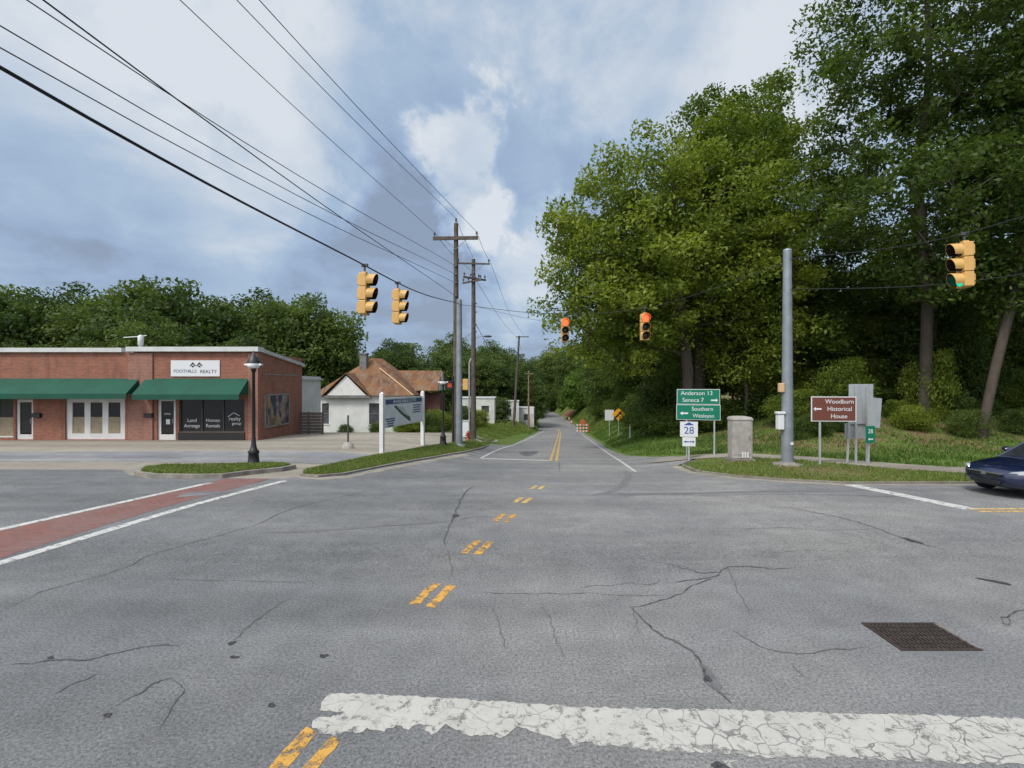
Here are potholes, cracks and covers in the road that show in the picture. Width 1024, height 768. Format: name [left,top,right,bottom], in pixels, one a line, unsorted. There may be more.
crack [107,677,185,727]
crack [472,550,860,703]
drain grate [861,622,983,651]
crack [443,487,489,577]
crack [8,644,169,694]
